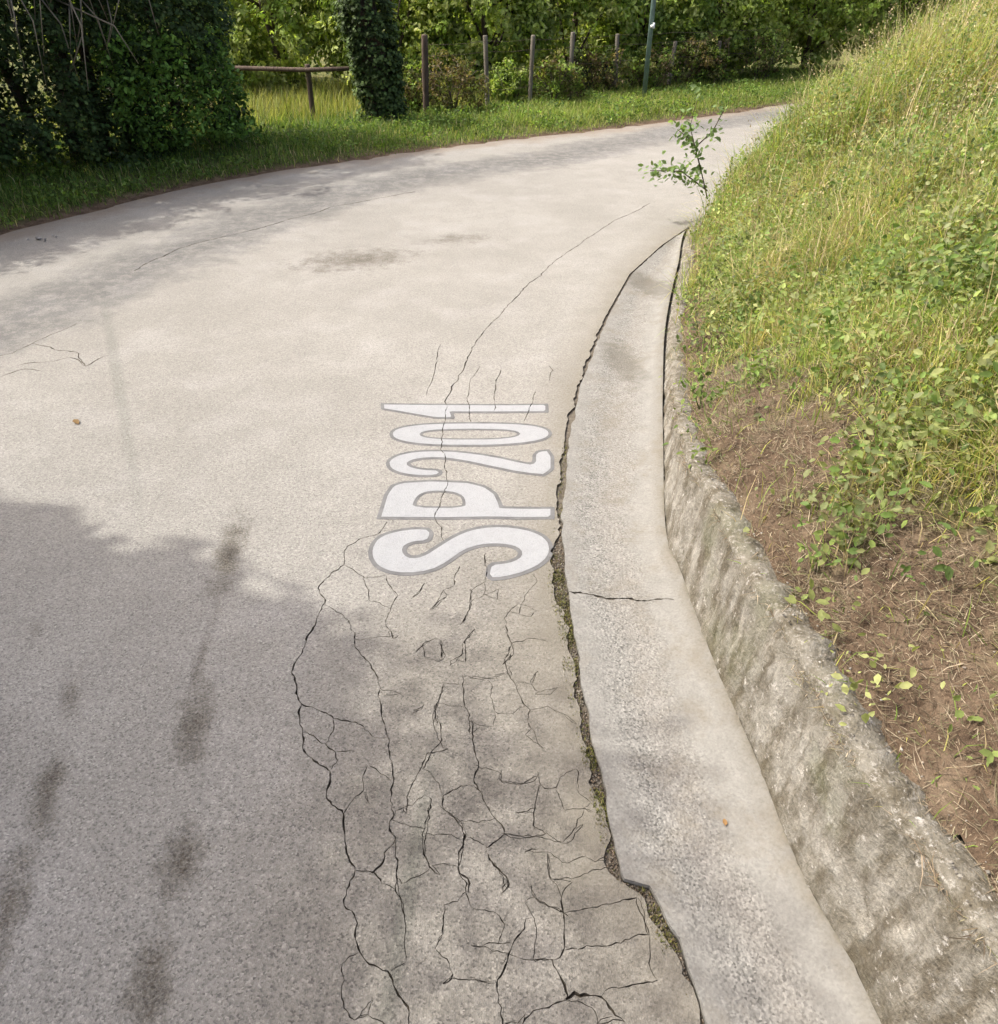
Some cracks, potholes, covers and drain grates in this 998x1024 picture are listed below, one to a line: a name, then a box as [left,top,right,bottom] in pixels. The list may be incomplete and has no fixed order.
crack [0,323,108,377]
crack [426,203,650,541]
crack [569,591,674,602]
crack [136,191,416,270]
